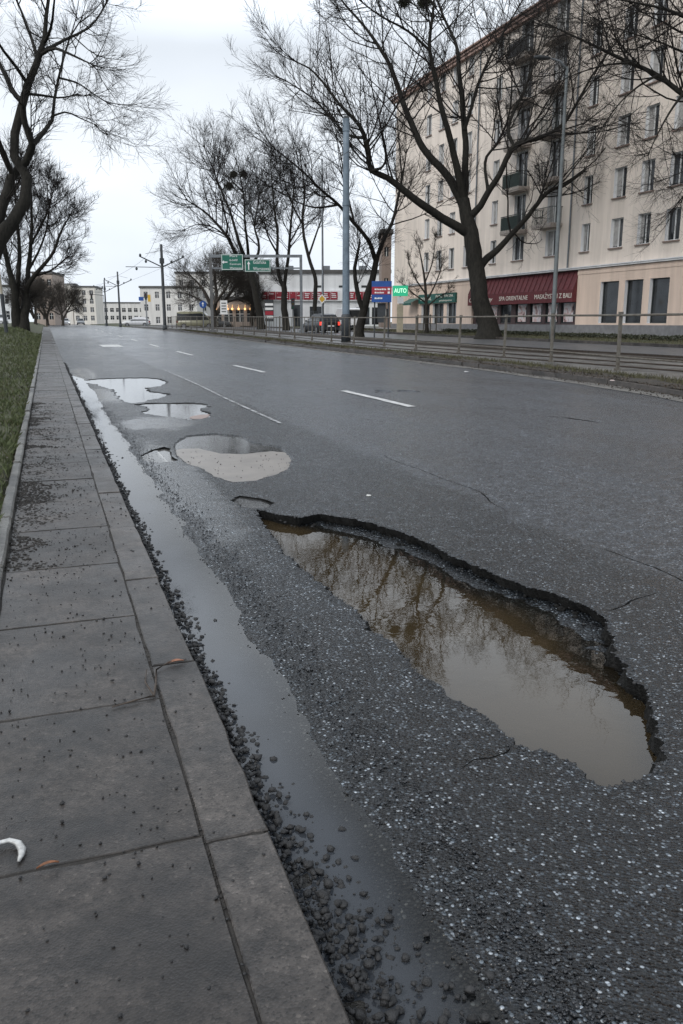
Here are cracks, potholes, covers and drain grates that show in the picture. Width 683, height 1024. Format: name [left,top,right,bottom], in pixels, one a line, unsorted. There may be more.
pothole [141,447,178,463]
pothole [85,377,171,403]
pothole [251,509,677,791]
crack [460,748,510,770]
pothole [173,433,295,482]
pothole [134,402,212,420]
crack [380,454,501,508]
crack [606,593,655,612]
